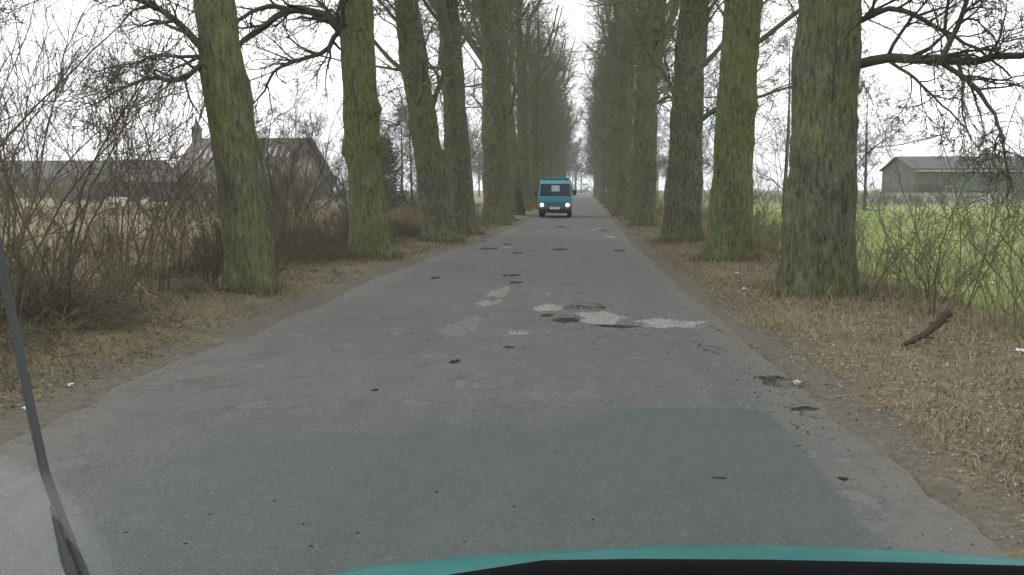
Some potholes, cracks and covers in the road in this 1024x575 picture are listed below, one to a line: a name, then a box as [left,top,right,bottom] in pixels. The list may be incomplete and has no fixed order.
crack [746,372,827,437]
pothole [756,375,796,387]
crack [690,325,728,355]
